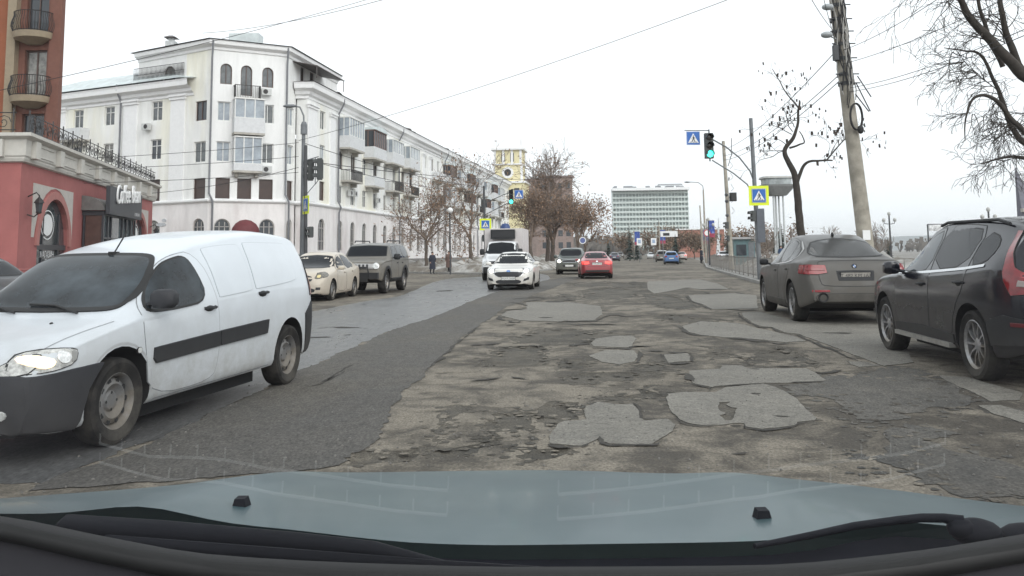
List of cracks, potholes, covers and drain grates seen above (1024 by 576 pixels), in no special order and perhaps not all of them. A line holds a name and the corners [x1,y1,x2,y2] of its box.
crack [303,365,352,388]
pothole [473,345,558,369]
pothole [476,407,546,442]
pothole [419,401,489,437]
pothole [523,401,585,427]
pothole [718,402,737,420]
pothole [480,442,590,465]
pothole [422,434,518,459]
